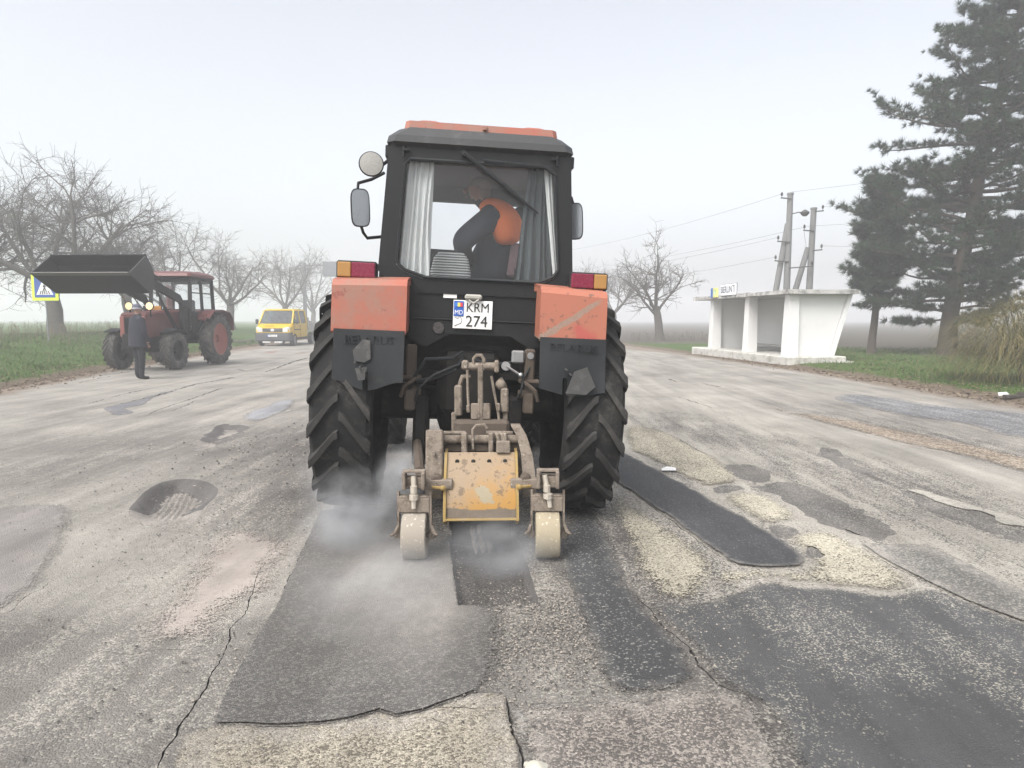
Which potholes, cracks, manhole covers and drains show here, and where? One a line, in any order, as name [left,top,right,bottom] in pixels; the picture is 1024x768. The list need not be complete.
pothole [194,424,249,451]
pothole [902,491,1024,542]
crack [845,529,933,587]
crack [93,531,312,768]
pothole [128,479,218,531]
